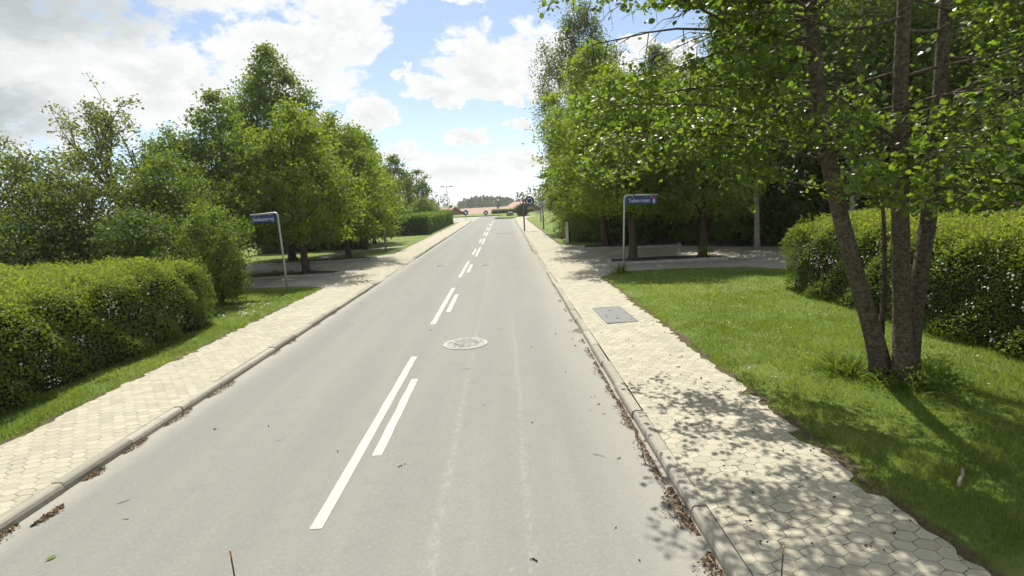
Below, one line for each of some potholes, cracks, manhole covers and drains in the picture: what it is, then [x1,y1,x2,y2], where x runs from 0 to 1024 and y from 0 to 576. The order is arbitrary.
manhole cover [443,338,488,350]
utility cover [593,306,639,324]
